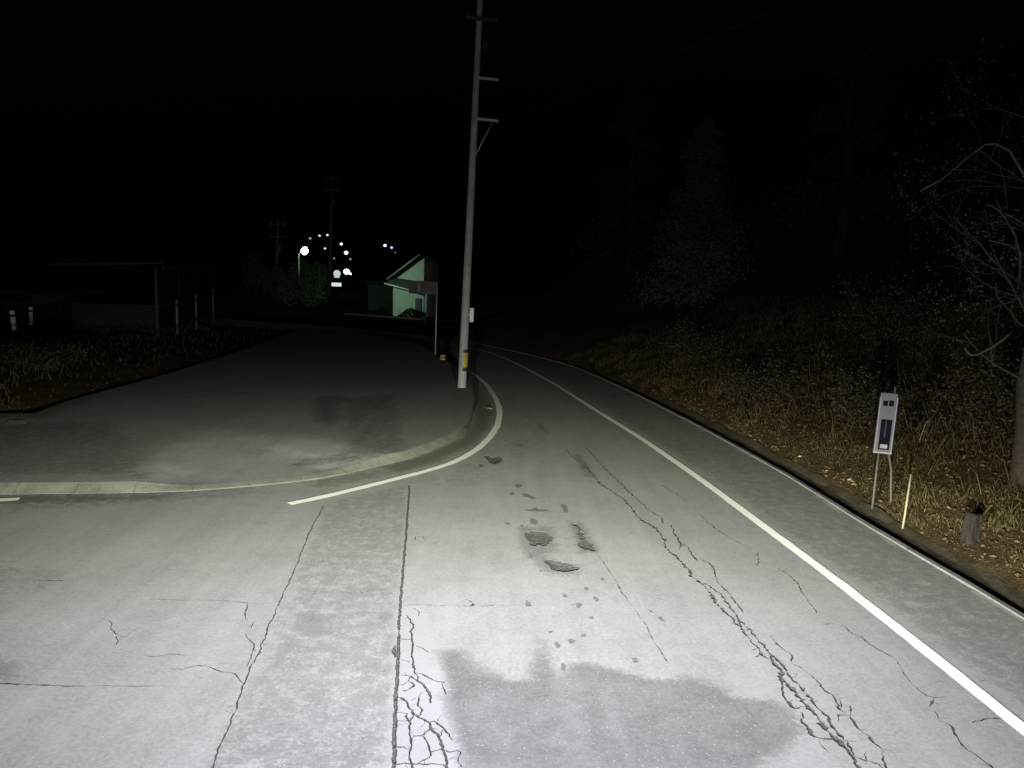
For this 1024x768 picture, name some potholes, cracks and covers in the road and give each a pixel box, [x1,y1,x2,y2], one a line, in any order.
pothole [523,531,553,546]
crack [394,600,524,768]
crack [566,446,1019,768]
pothole [571,523,595,551]
pothole [484,455,503,464]
pothole [543,559,579,572]
